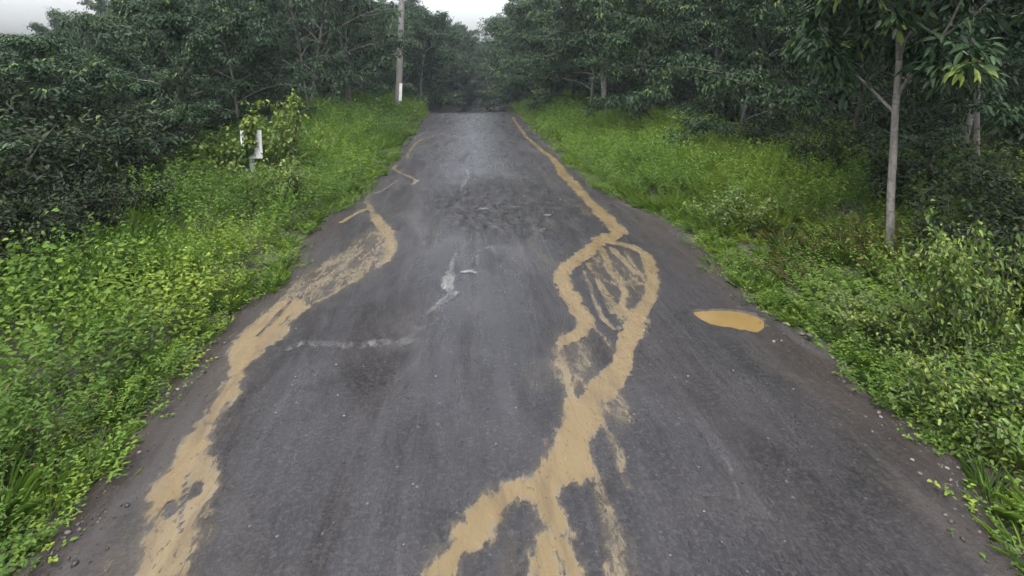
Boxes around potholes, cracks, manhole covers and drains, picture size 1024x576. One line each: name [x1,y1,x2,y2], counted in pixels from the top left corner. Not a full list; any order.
pothole [691,308,769,333]
